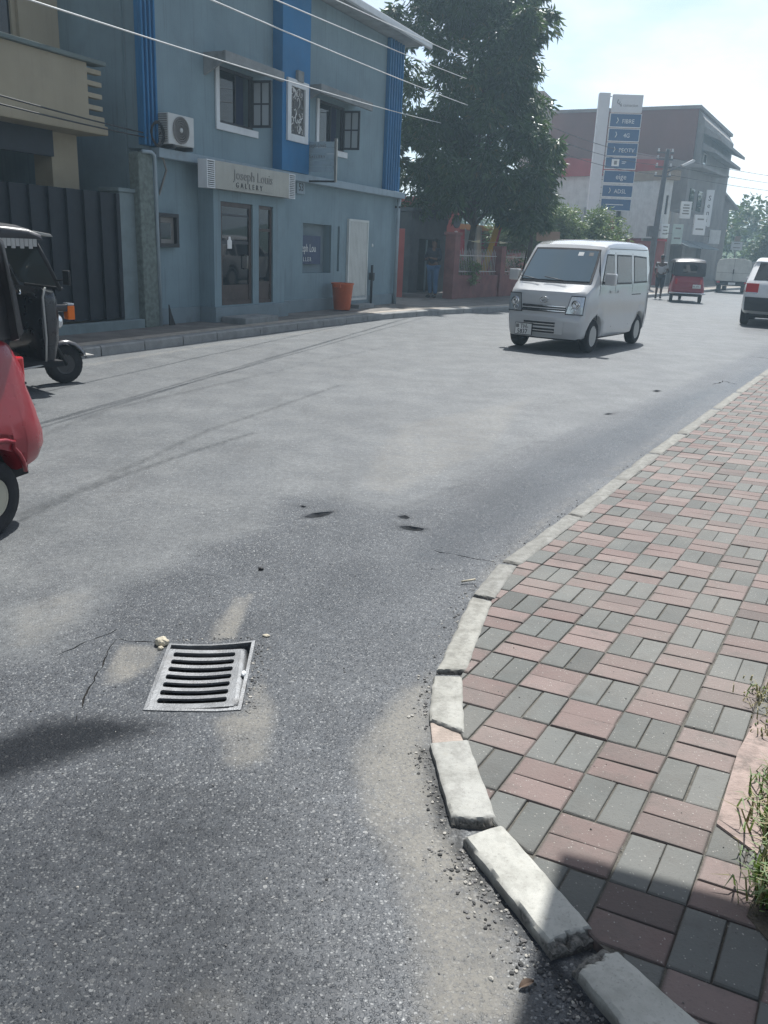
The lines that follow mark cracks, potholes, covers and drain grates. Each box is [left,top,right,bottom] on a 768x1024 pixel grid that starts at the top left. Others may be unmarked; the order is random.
drain grate [143,640,255,712]
crack [58,629,149,721]
